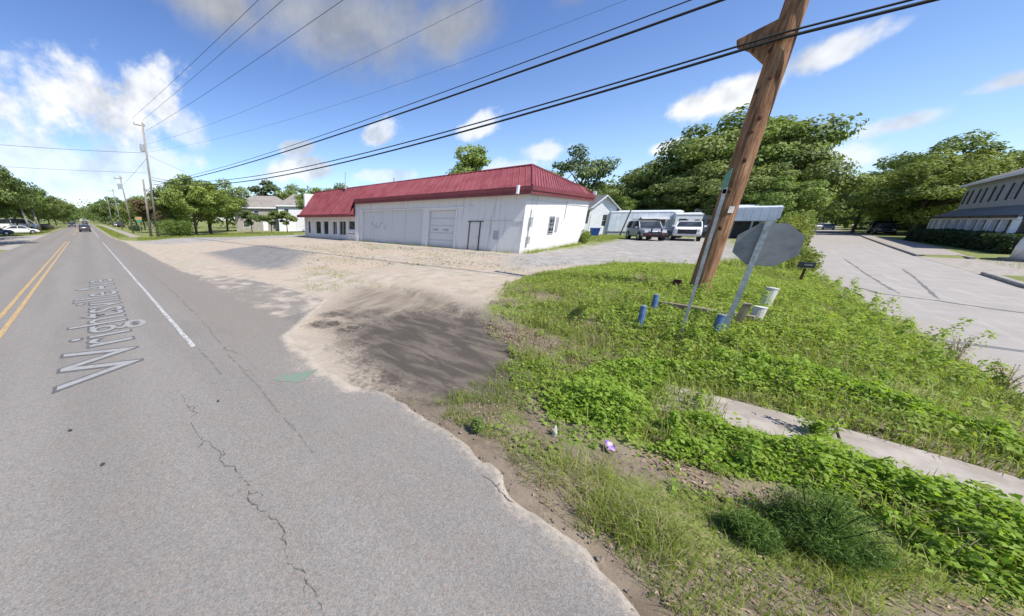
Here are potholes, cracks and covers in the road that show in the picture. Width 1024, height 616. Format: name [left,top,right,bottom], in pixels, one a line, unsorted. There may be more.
crack [178,390,324,615]
